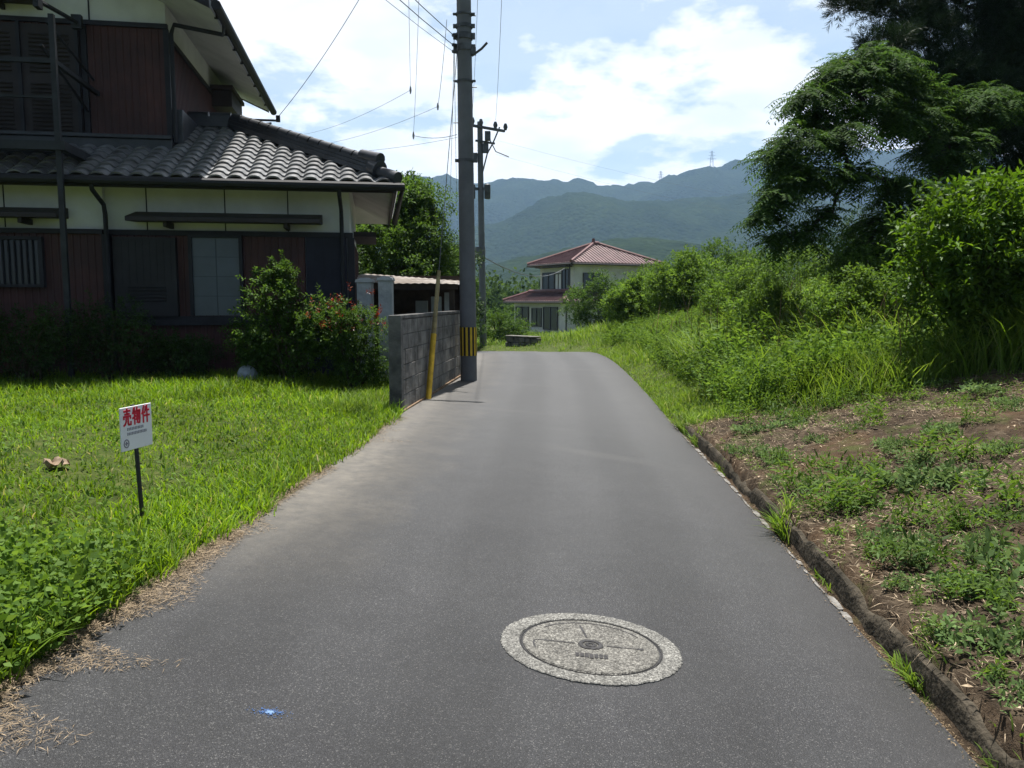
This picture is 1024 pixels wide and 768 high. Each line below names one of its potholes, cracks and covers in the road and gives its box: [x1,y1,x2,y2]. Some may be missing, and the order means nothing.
manhole cover [500,613,683,687]
